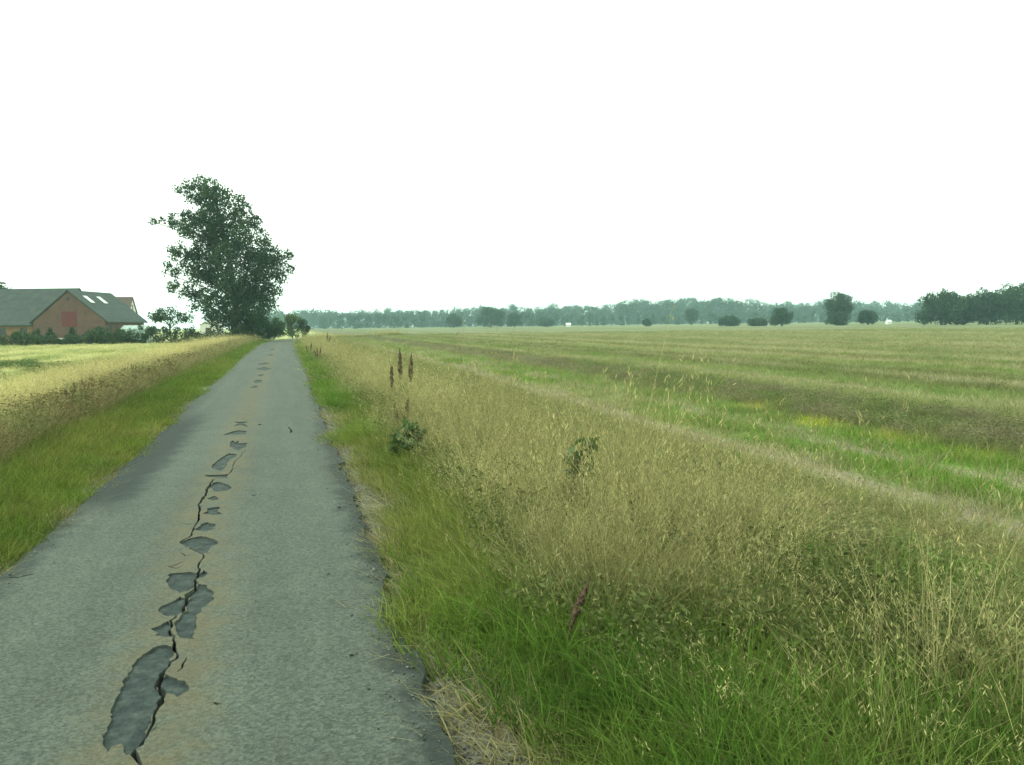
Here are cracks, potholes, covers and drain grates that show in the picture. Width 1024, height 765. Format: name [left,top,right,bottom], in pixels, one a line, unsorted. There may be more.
pothole [174,584,214,639]
pothole [151,621,172,637]
pothole [194,522,215,531]
pothole [210,482,232,492]
pothole [161,674,189,697]
pothole [212,453,237,471]
crack [129,451,245,765]
pothole [102,645,174,755]
pothole [158,596,185,617]
pothole [230,441,247,450]
pothole [182,536,218,554]
pothole [166,572,196,593]
